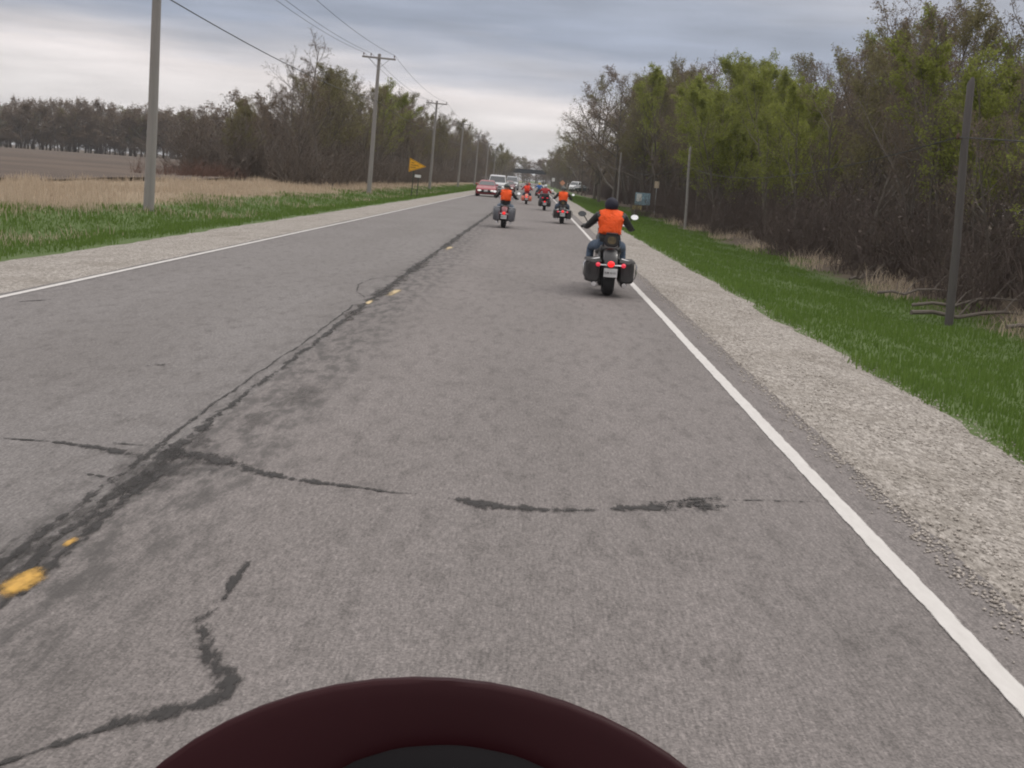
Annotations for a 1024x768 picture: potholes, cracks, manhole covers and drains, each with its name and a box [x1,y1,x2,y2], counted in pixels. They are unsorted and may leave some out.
crack [0,560,251,765]
crack [0,198,512,608]
